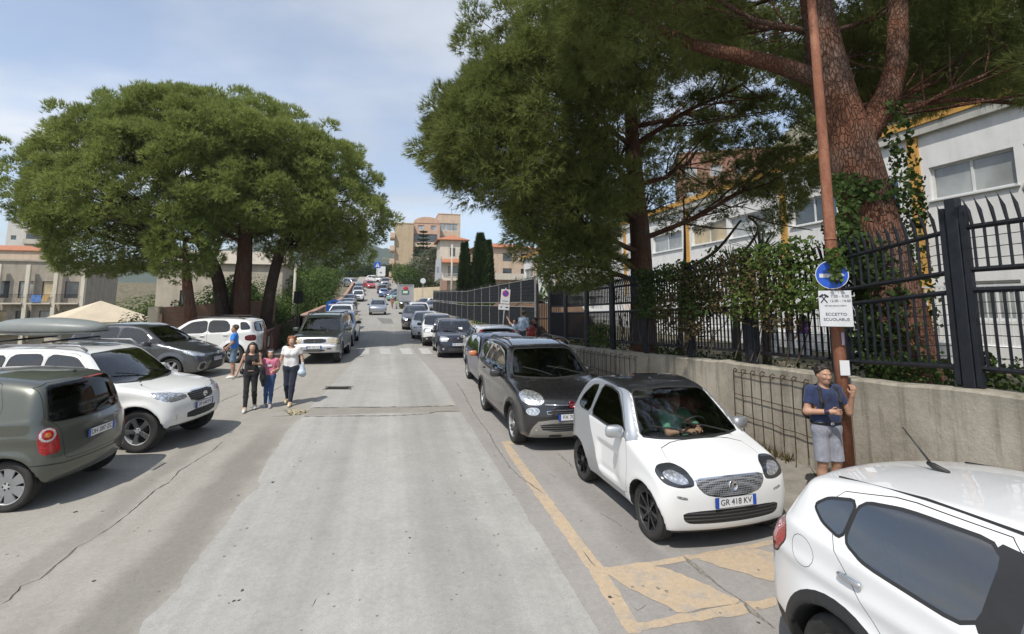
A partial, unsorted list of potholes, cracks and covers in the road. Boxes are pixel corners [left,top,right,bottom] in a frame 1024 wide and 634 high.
crack [2,442,222,604]
crack [683,556,774,628]
